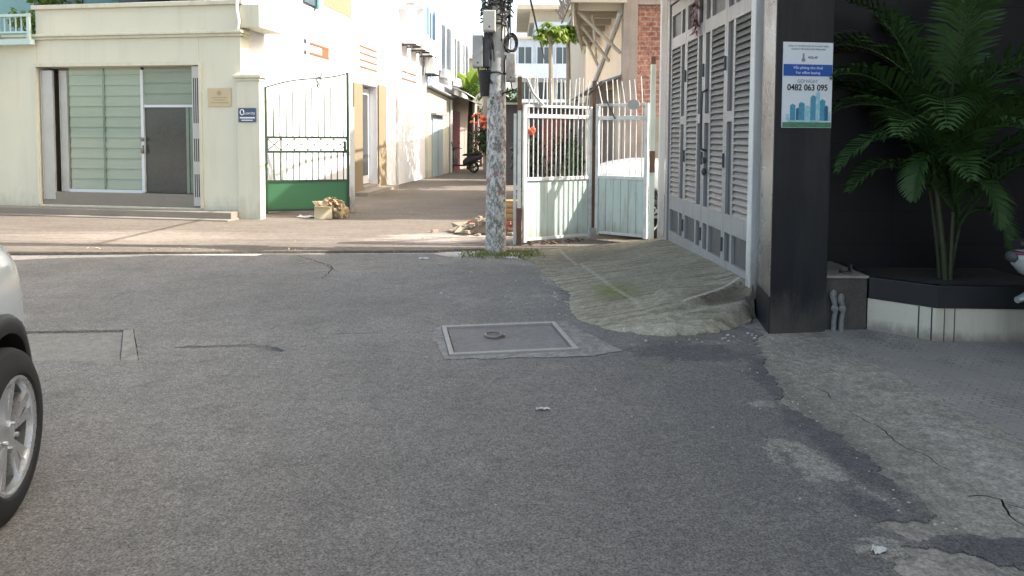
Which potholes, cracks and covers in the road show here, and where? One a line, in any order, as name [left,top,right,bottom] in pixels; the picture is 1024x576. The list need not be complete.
crack [810,385,939,465]
manhole cover [431,321,622,359]
crack [968,495,1024,525]
